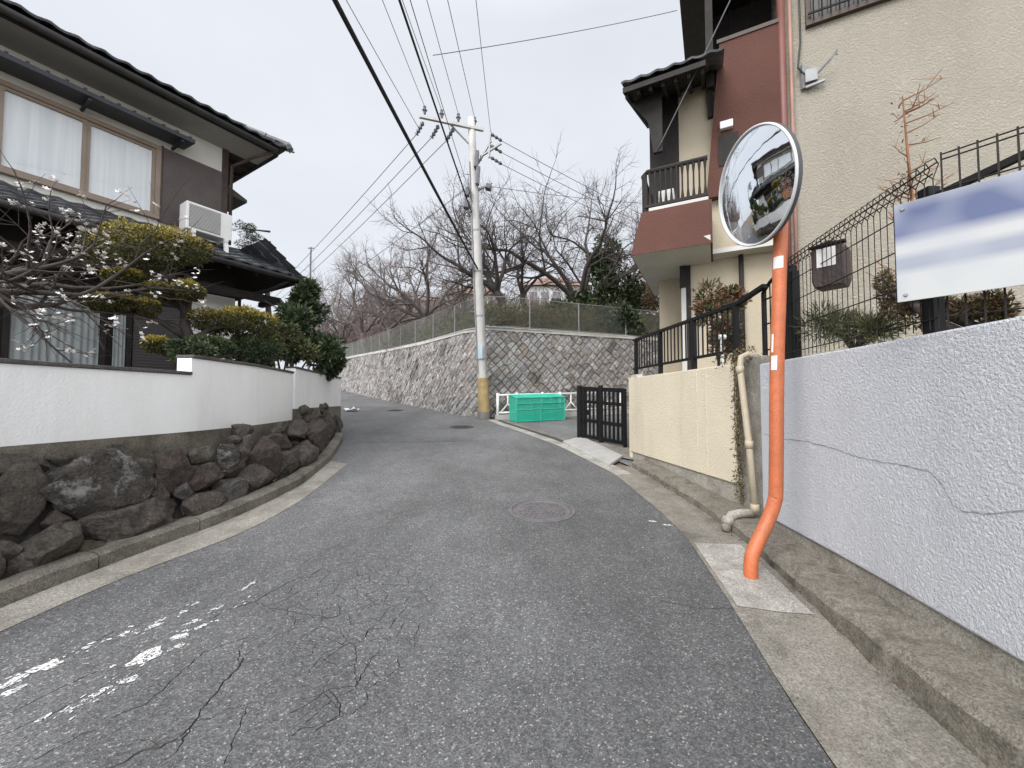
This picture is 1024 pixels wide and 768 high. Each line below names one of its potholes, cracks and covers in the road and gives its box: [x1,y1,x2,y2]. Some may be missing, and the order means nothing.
crack [32,565,443,768]
manhole cover [509,499,575,523]
